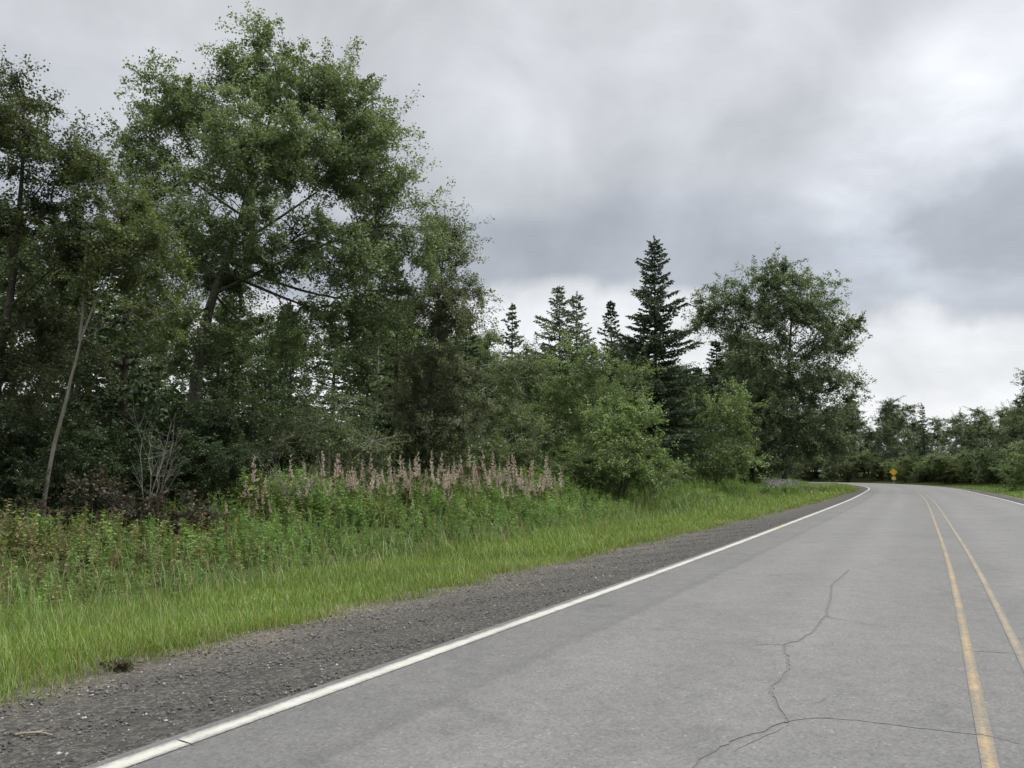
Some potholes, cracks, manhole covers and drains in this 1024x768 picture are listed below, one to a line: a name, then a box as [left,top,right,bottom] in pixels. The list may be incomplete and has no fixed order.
crack [685,570,1022,768]
